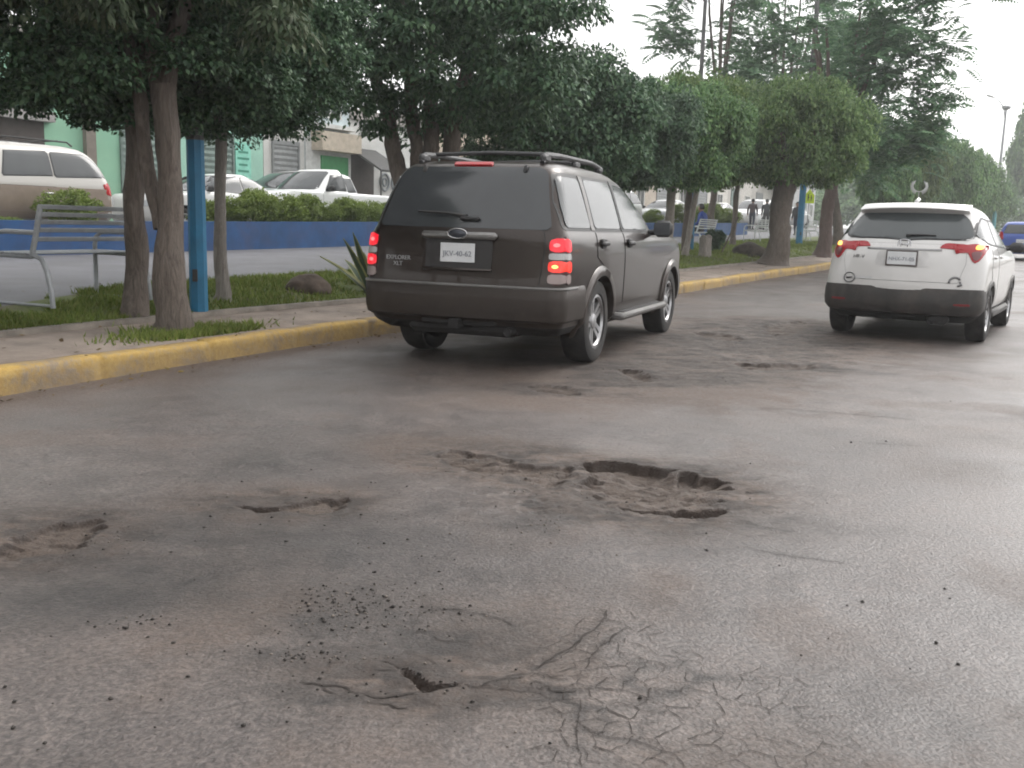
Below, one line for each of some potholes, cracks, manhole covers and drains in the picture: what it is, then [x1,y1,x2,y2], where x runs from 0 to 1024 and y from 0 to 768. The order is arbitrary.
pothole [730,362,820,371]
crack [469,607,871,768]
crack [301,681,425,708]
pothole [0,517,111,564]
crack [374,608,515,672]
pothole [524,384,586,396]
pothole [394,667,477,694]
pothole [231,496,352,516]
pothole [613,369,659,382]
pothole [570,460,738,523]
pothole [430,449,577,489]
